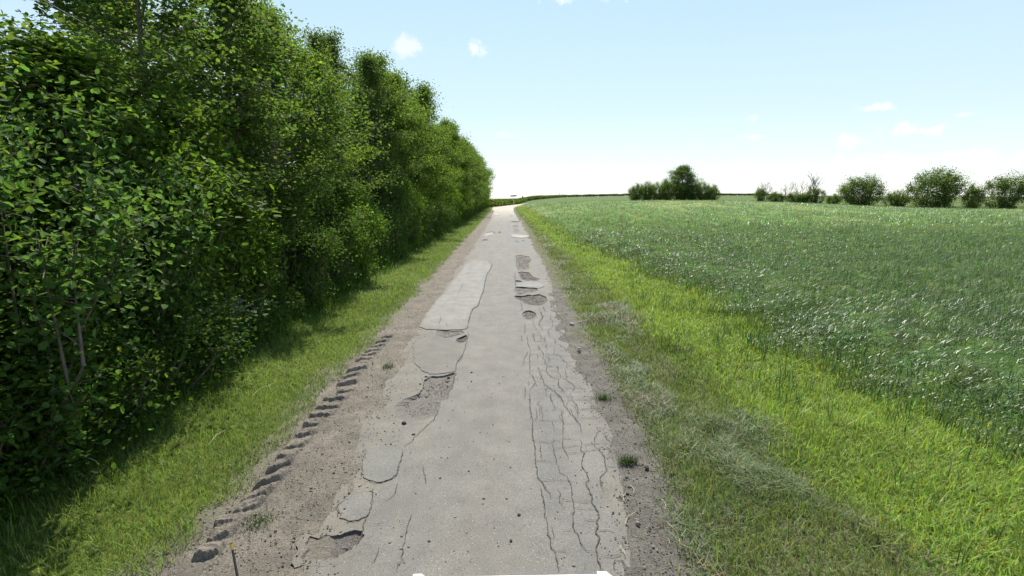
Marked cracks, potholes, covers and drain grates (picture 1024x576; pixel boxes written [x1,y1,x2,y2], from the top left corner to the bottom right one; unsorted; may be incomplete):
crack [337,331,469,567]
pothole [388,371,457,424]
pothole [291,526,373,568]
crack [521,304,617,570]
pothole [517,309,541,321]
pothole [510,255,536,271]
pothole [514,271,544,282]
pothole [510,293,553,307]
